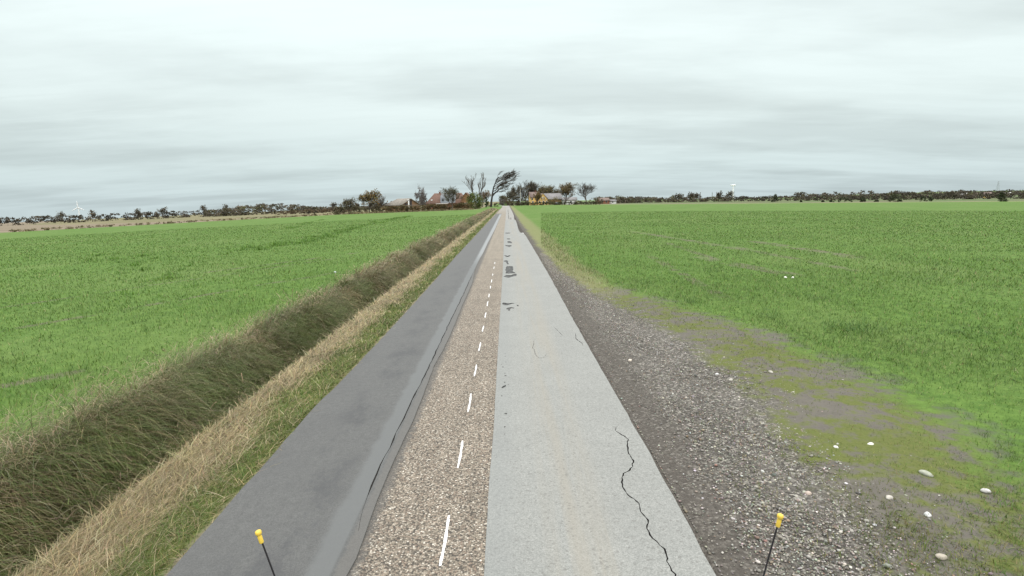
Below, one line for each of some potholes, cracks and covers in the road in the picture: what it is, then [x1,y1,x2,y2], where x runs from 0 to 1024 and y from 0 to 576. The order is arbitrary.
crack [615,425,676,576]
